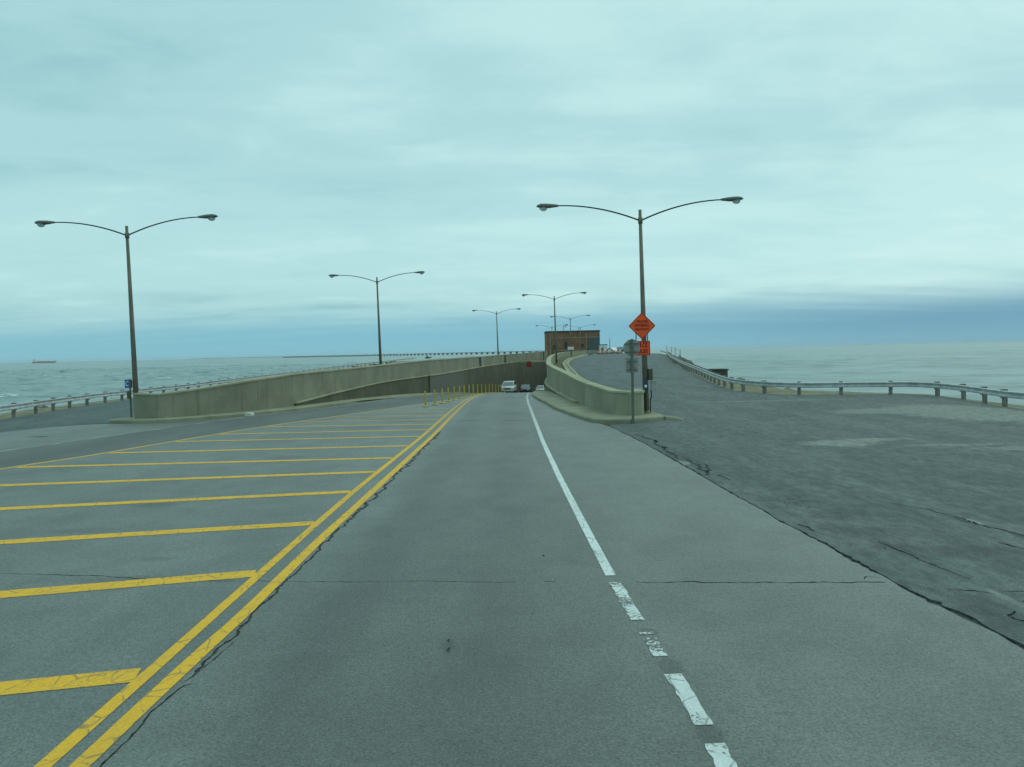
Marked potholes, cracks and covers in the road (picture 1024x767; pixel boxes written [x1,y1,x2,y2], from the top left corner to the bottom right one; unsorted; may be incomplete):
crack [870,499,1024,549]
crack [963,590,1024,622]
crack [877,541,970,579]
